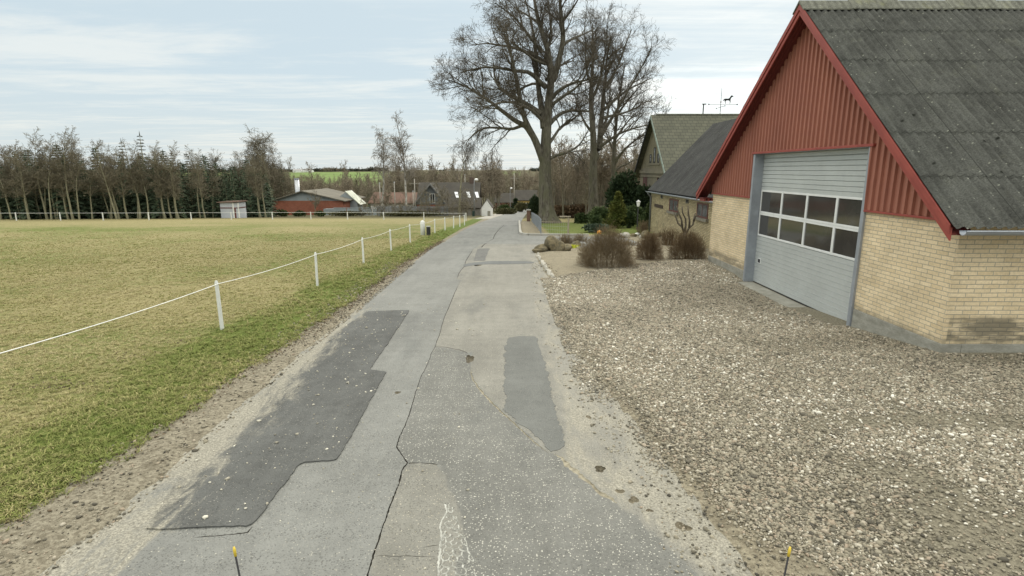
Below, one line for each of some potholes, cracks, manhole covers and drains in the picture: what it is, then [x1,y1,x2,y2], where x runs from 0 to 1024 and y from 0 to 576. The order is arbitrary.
crack [366,225,504,576]
